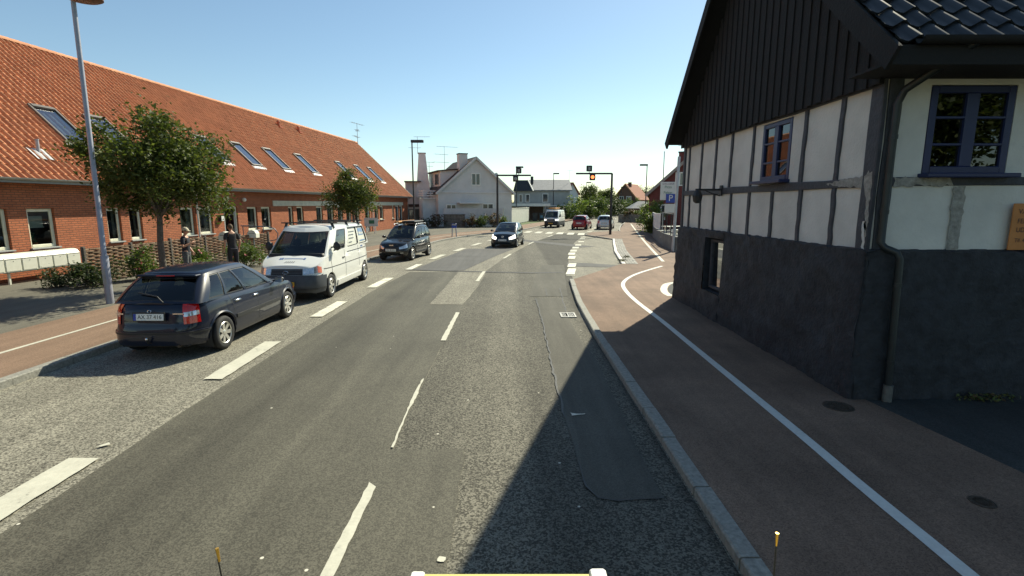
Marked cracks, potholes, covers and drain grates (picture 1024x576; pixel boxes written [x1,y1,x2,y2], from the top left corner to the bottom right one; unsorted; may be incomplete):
manhole cover [822,401,855,412]
manhole cover [967,495,998,509]
